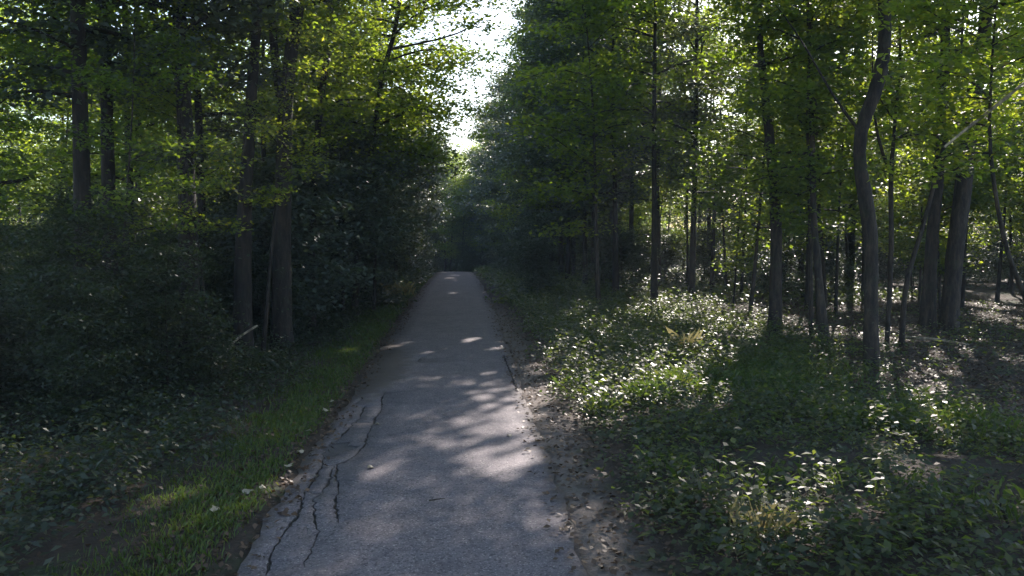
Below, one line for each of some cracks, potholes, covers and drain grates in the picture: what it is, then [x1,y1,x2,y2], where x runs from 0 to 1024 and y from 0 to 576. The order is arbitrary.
crack [265,394,384,575]
